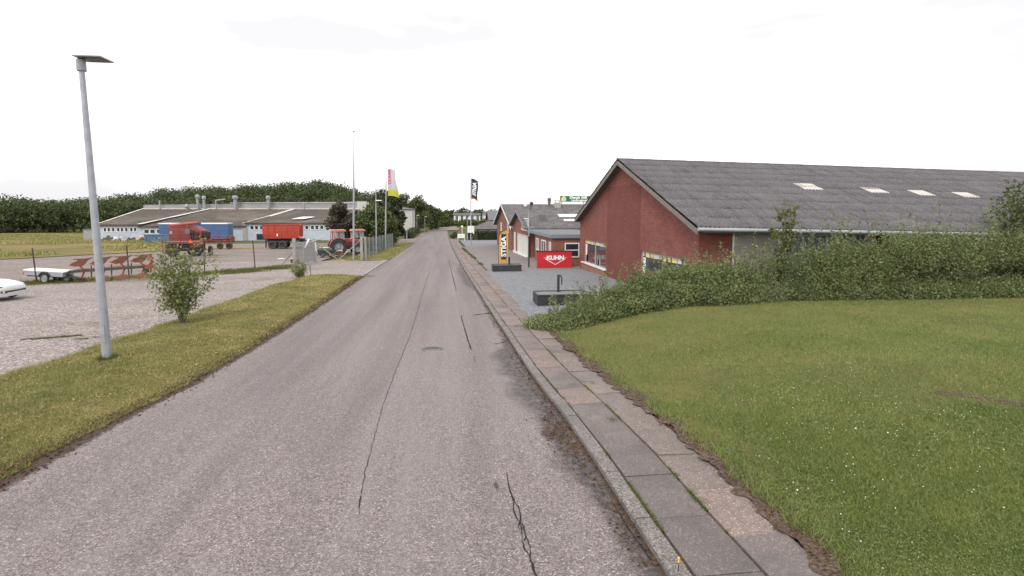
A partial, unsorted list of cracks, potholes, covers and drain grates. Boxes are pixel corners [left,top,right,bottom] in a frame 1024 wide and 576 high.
crack [359,263,432,513]
crack [507,476,537,576]
